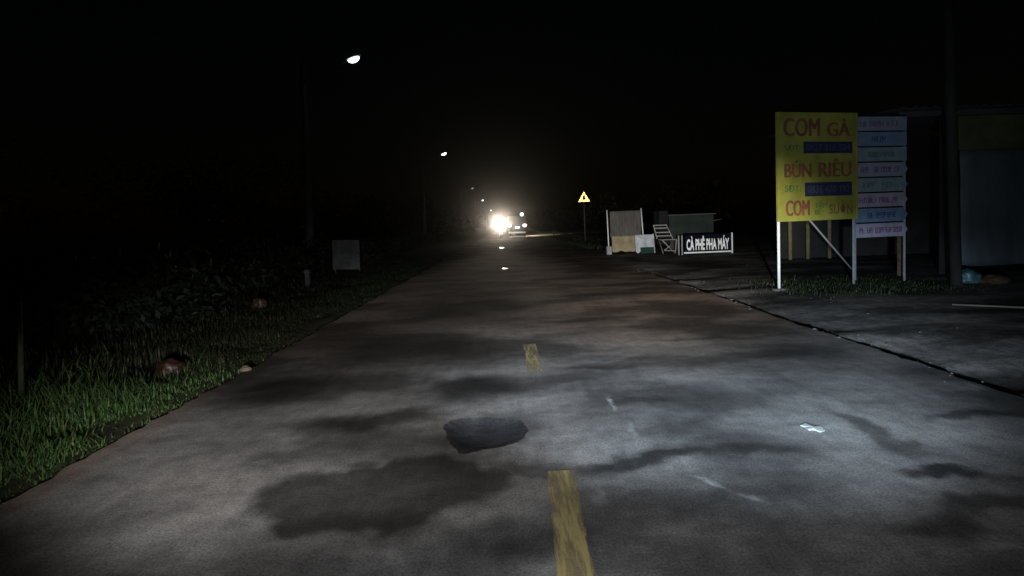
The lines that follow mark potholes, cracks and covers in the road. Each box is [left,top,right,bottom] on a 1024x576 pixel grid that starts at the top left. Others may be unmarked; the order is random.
pothole [443,417,529,454]
